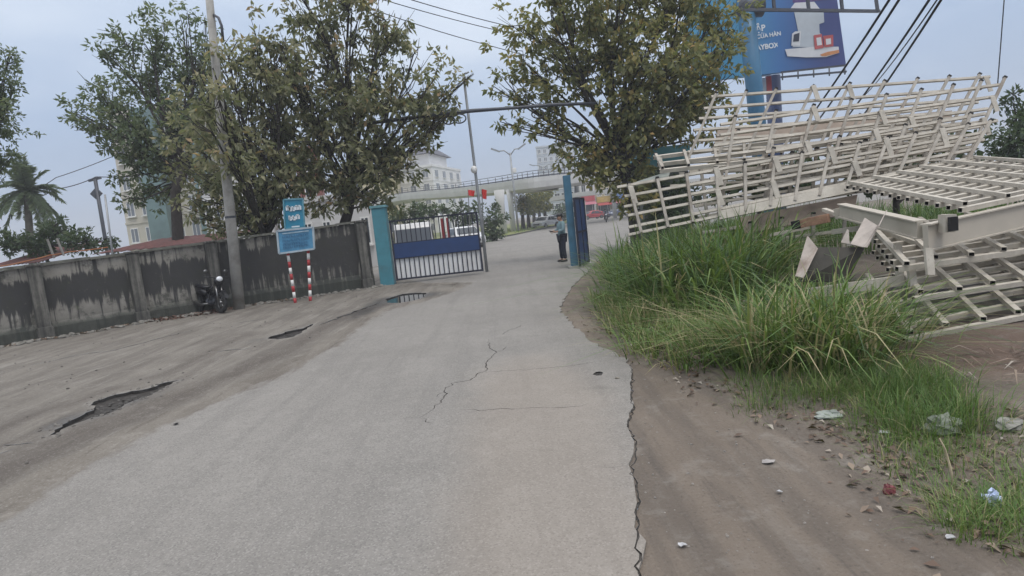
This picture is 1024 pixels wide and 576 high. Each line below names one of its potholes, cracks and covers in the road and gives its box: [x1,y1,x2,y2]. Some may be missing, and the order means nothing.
pothole [51,380,179,435]
crack [627,365,642,576]
pothole [269,324,313,339]
